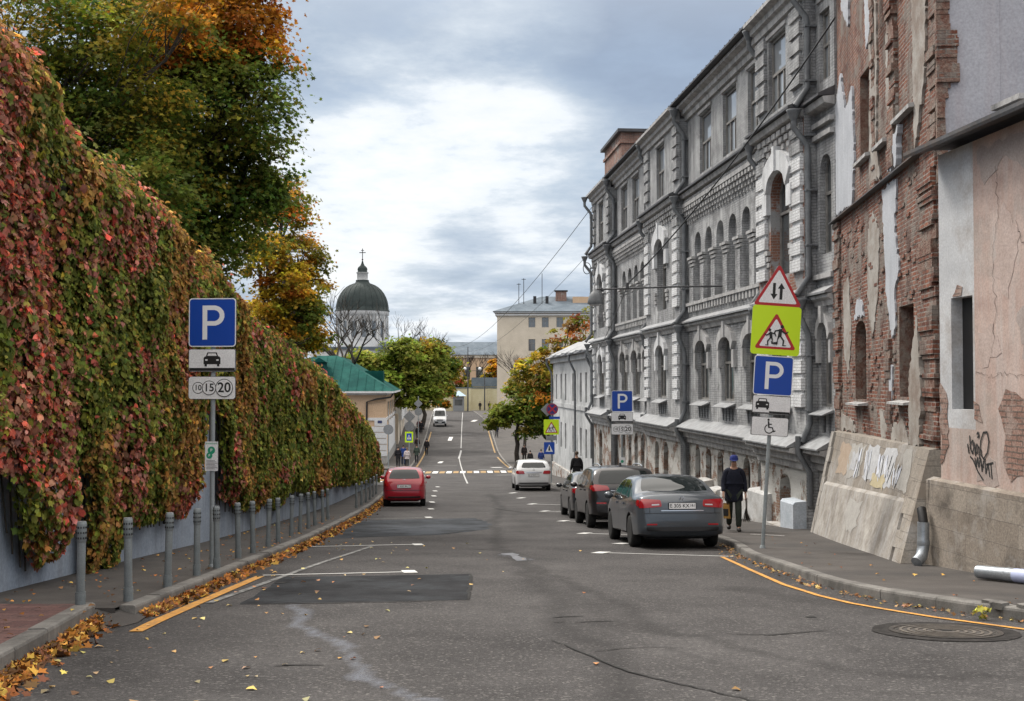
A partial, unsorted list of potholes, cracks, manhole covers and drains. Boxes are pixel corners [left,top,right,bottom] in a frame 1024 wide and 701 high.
crack [553,640,758,701]
manhole cover [872,622,1022,642]
